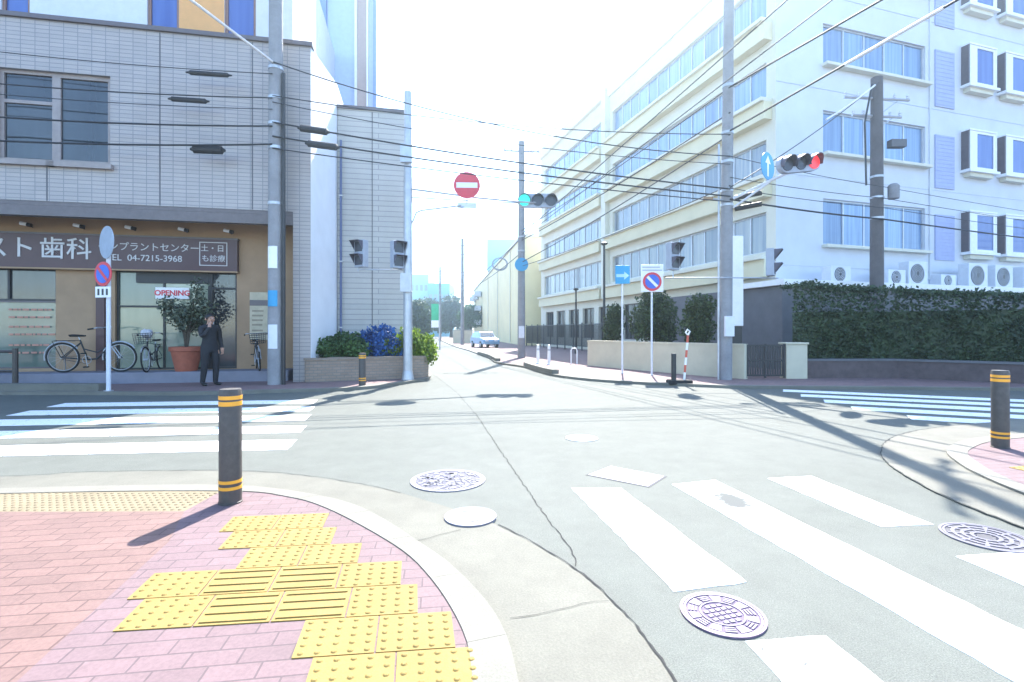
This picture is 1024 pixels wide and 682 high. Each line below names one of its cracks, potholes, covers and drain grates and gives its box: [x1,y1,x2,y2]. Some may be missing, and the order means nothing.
manhole cover [444,507,497,527]
manhole cover [680,592,768,640]
manhole cover [410,469,485,493]
crack [437,377,677,682]
manhole cover [938,522,1024,553]
manhole cover [565,434,598,442]
